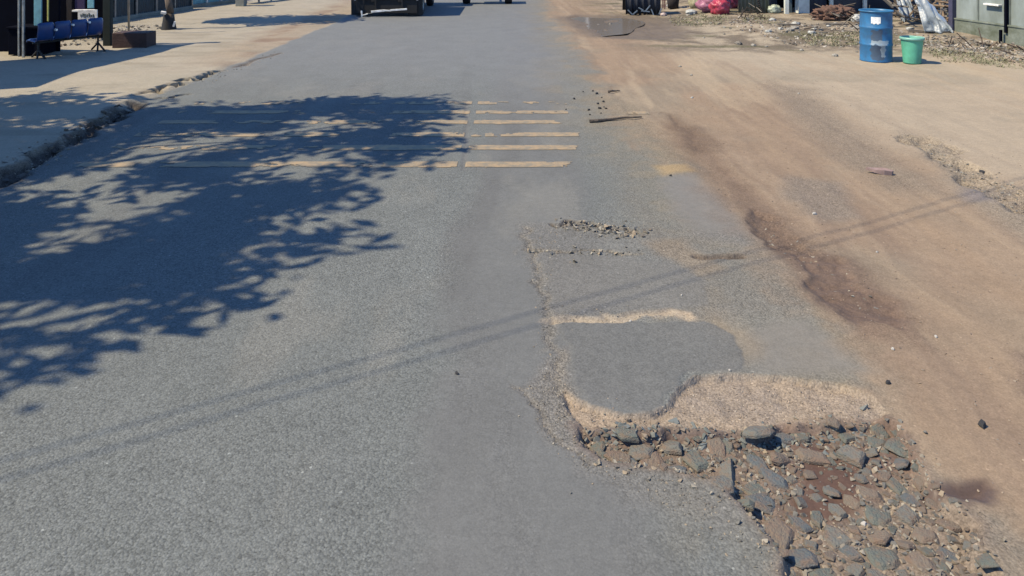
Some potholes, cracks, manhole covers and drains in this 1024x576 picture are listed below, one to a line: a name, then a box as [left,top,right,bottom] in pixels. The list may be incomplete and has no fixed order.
crack [521,248,642,256]
pothole [572,416,1003,576]
pothole [549,219,643,234]
